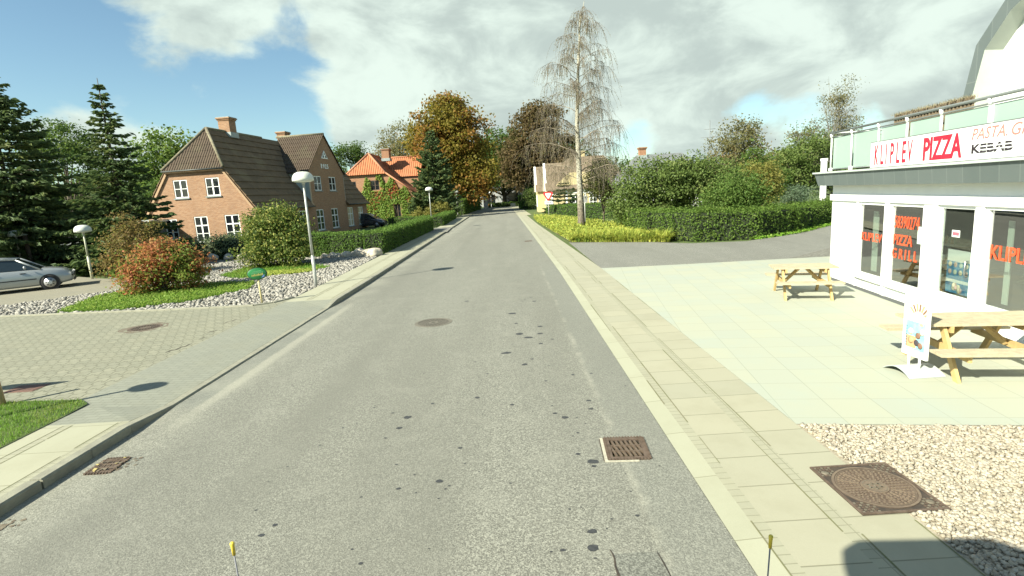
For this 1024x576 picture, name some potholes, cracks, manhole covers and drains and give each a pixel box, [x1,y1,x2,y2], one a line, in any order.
manhole cover [415,318,452,327]
manhole cover [810,462,951,516]
manhole cover [3,383,51,393]
manhole cover [118,322,169,334]
drain grate [599,436,652,462]
drain grate [83,456,131,476]
